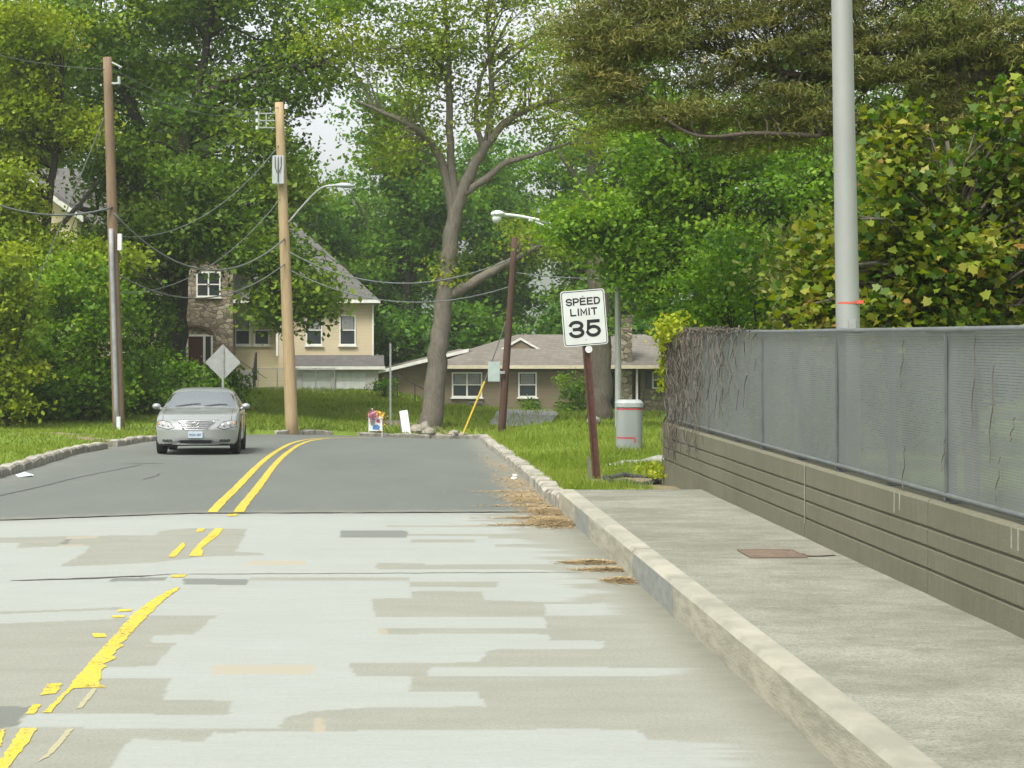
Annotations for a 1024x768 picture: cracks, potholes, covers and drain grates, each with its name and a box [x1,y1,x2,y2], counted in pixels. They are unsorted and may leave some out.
manhole cover [737,549,808,559]
crack [0,463,160,496]
crack [32,572,492,580]
